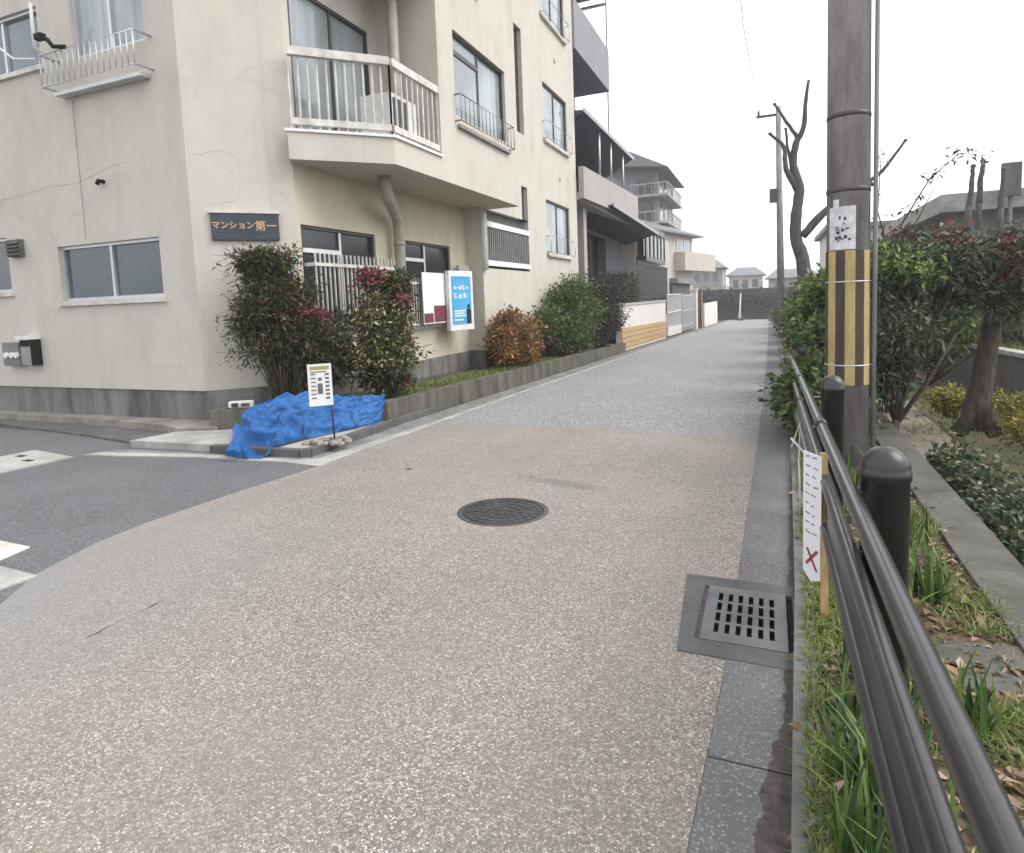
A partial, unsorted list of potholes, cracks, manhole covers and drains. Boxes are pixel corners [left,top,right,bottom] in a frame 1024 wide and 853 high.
drain grate [677,573,794,671]
manhole cover [457,498,549,527]
